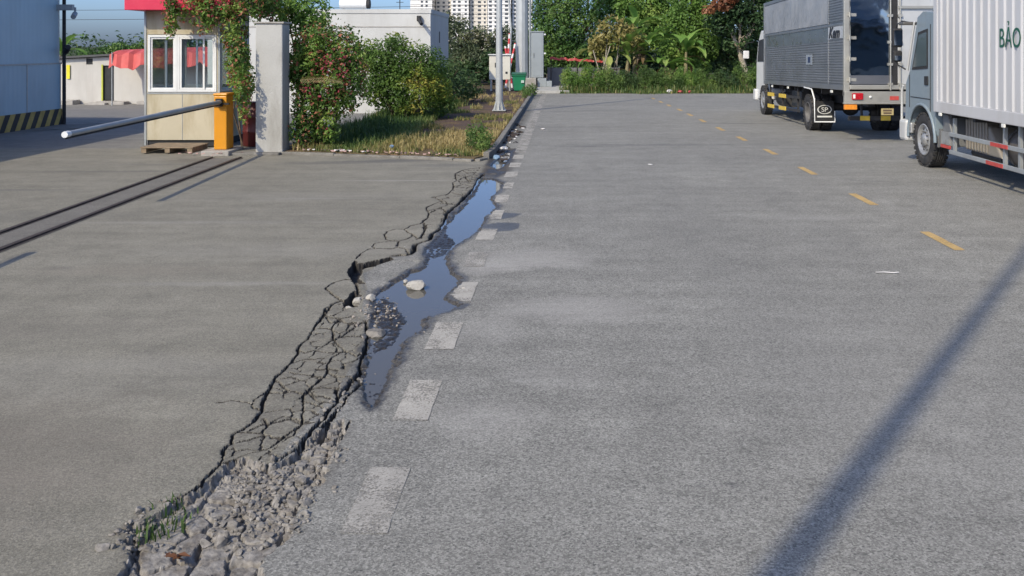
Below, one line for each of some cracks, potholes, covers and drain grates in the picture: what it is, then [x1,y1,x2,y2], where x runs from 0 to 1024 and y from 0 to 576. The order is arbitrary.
pothole [117,418,346,576]
crack [169,279,369,502]
crack [356,167,485,259]
